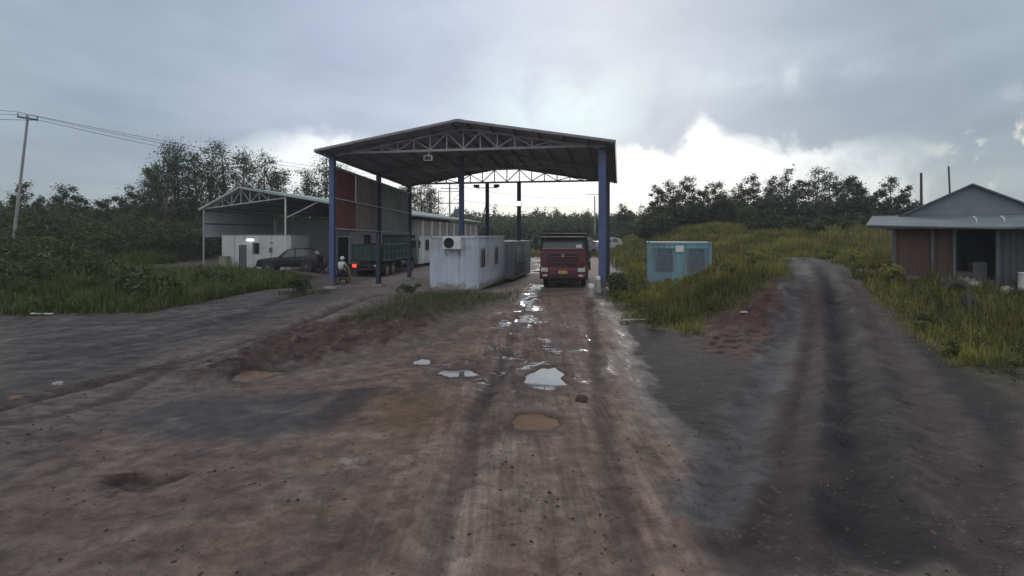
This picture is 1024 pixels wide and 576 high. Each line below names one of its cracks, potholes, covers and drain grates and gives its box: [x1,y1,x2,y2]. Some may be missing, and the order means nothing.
pothole [427,366,489,380]
pothole [515,364,577,394]
pothole [215,360,296,385]
pothole [81,468,207,501]
pothole [499,408,576,436]
